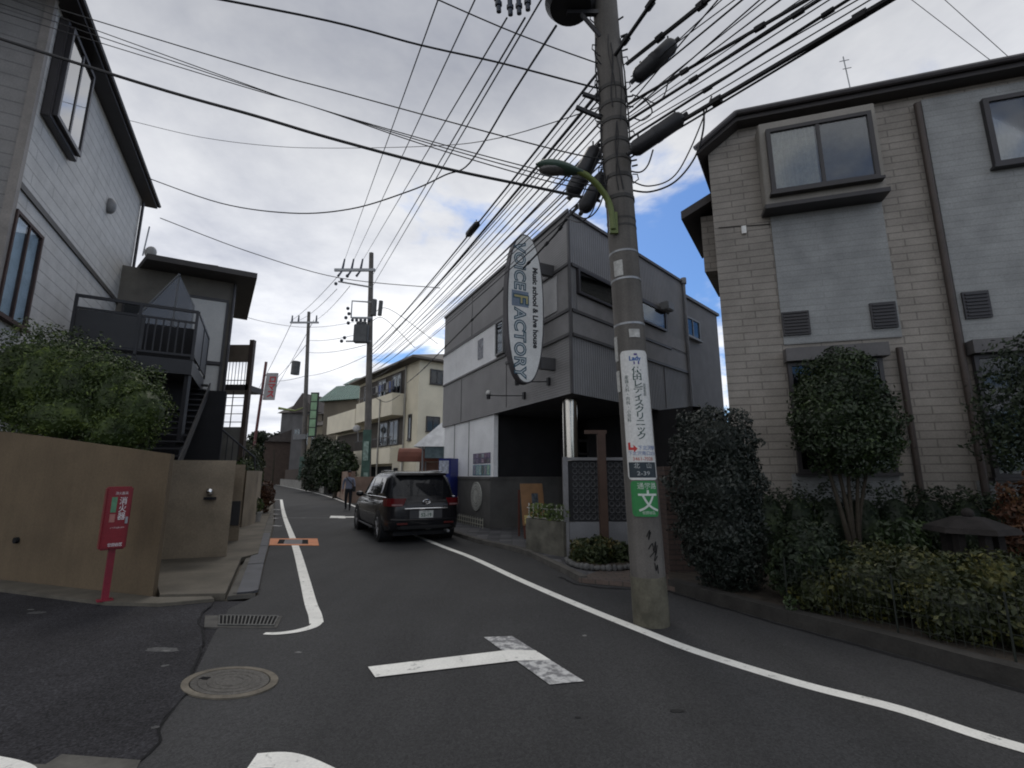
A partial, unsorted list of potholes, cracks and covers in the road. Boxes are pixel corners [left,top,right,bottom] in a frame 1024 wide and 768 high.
drain grate [204,615,282,629]
utility cover [269,538,319,546]
manhole cover [180,666,278,700]
